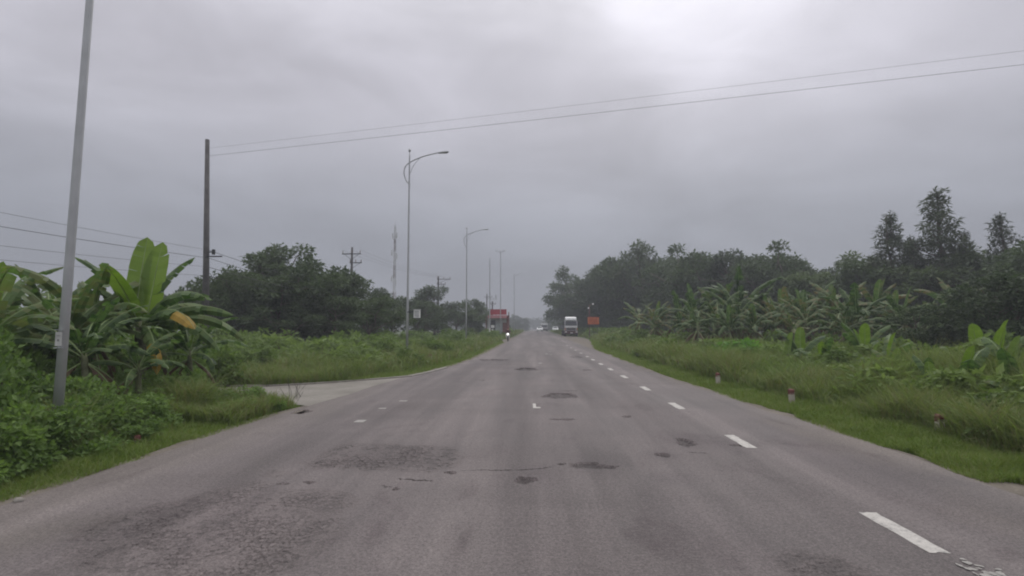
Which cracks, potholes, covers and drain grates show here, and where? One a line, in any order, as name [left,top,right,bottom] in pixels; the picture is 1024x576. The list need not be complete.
pothole [675,437,698,448]
crack [62,441,550,576]
pothole [514,476,538,484]
